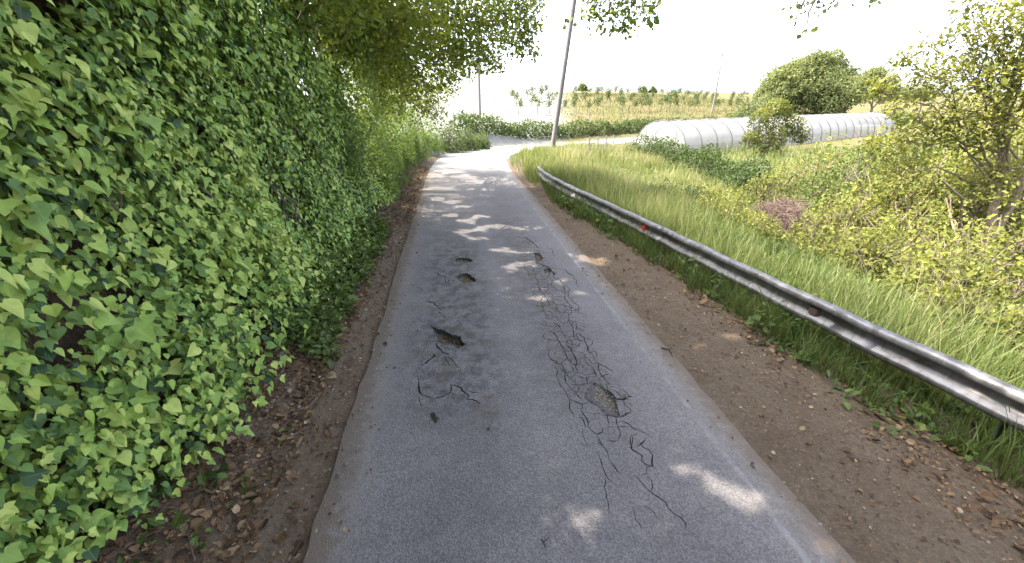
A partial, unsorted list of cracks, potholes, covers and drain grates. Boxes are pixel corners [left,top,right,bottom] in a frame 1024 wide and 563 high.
crack [418,343,480,406]
pothole [584,383,620,416]
pothole [456,273,476,283]
pothole [430,325,465,348]
